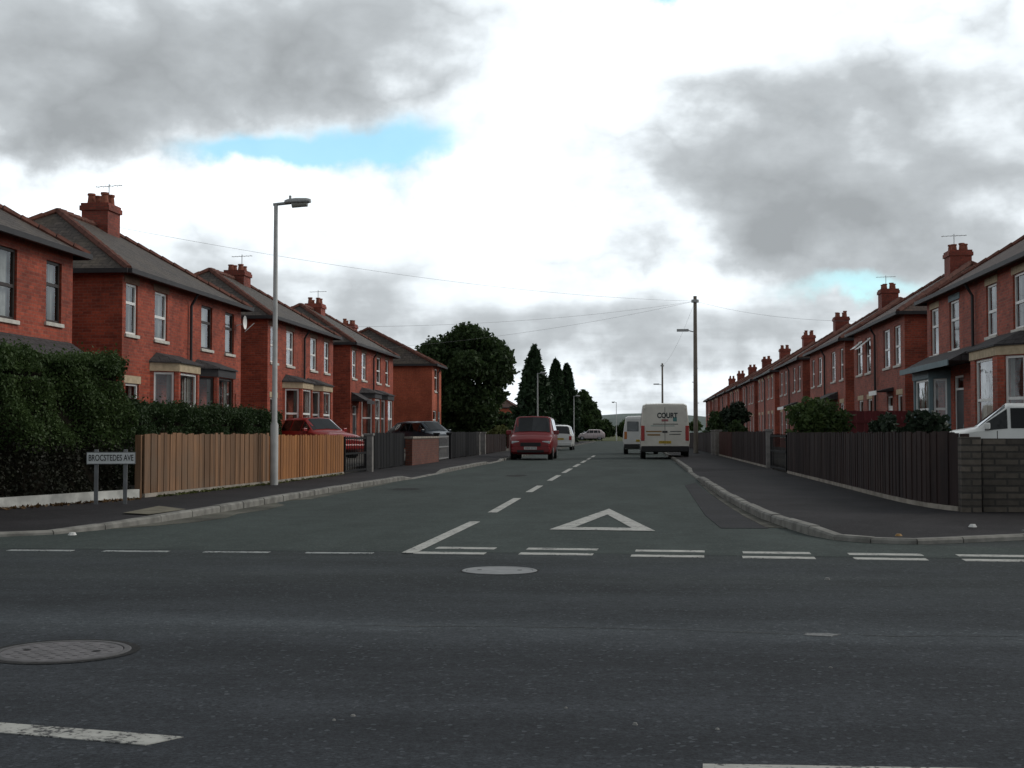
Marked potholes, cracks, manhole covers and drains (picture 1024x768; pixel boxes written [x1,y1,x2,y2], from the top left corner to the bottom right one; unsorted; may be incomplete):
manhole cover [460,566,539,575]
manhole cover [0,639,140,664]
